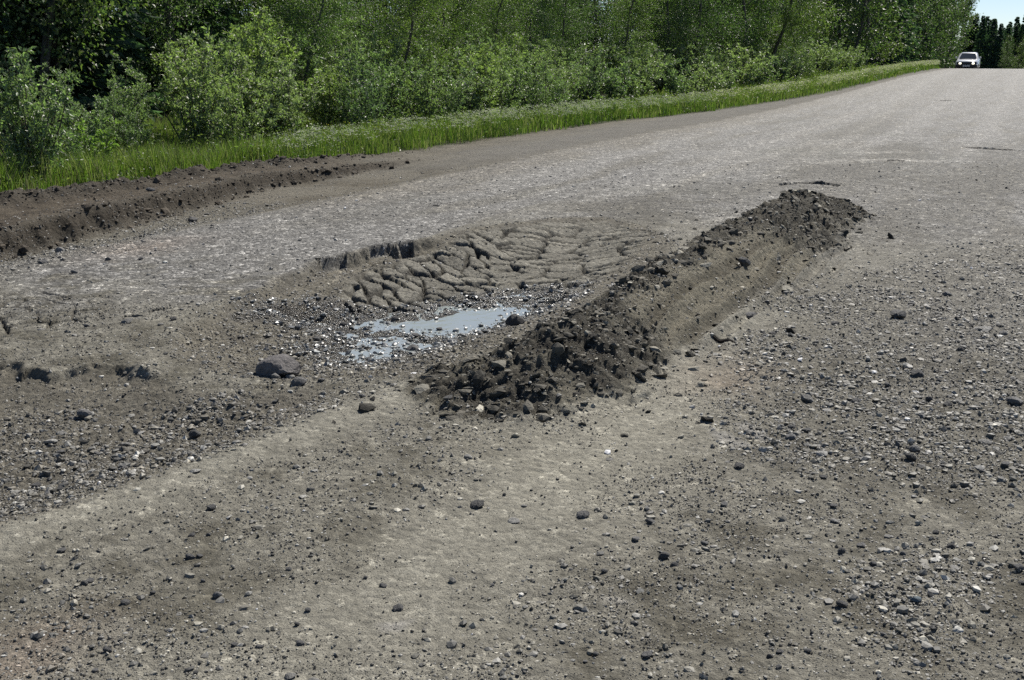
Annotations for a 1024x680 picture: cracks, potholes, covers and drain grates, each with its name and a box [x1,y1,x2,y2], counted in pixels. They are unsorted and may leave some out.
pothole [168,216,683,384]
